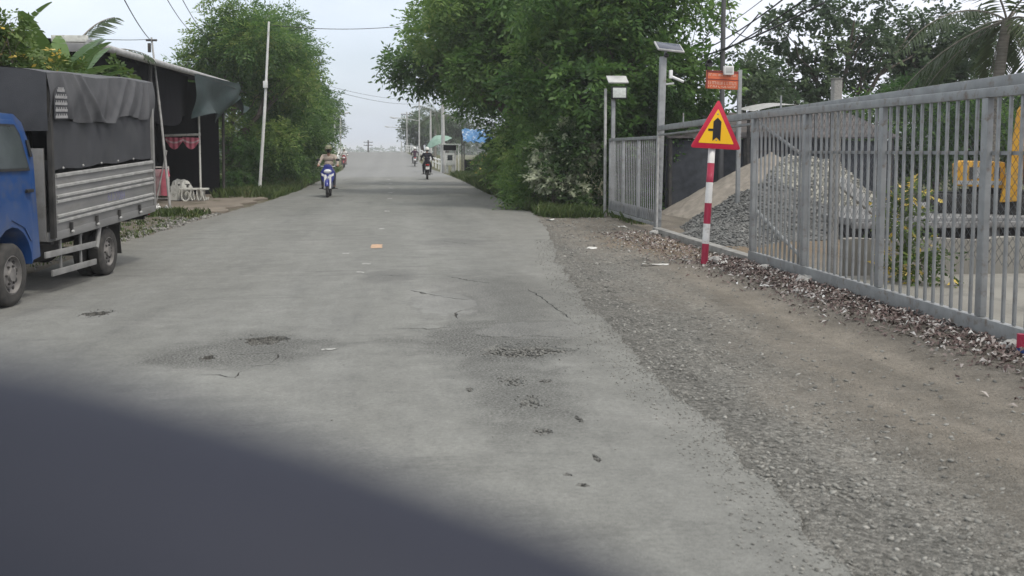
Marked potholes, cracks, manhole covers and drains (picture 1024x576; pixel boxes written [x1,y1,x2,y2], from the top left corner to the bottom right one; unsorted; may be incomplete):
pothole [76,309,116,317]
pothole [233,334,302,347]
pothole [514,395,550,410]
crack [390,275,487,330]
pothole [461,342,589,360]
crack [214,353,280,378]
pothole [497,375,528,387]
